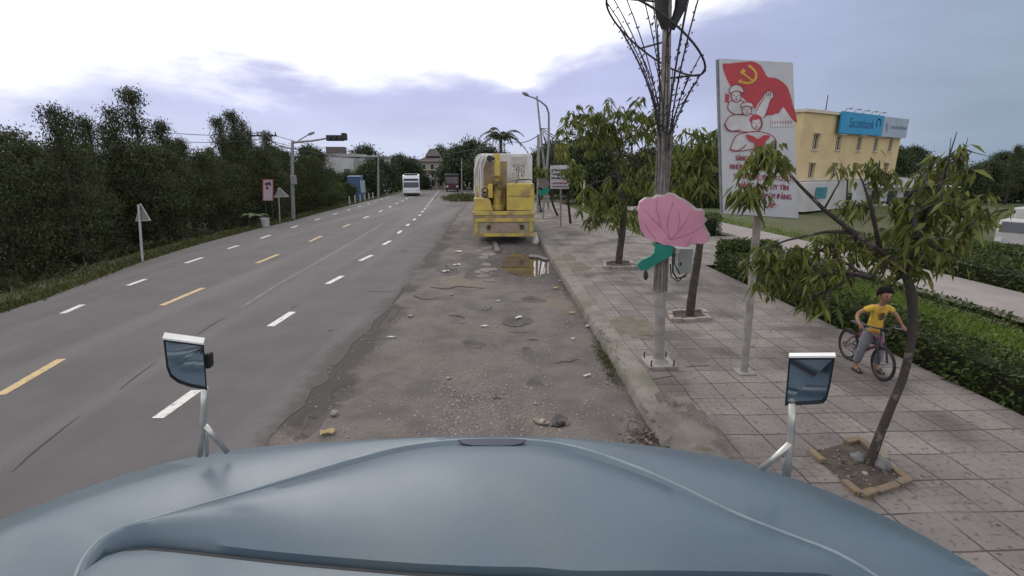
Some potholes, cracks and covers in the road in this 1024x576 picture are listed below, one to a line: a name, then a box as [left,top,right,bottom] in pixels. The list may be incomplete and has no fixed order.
pothole [462,339,487,350]
crack [375,265,497,322]
pothole [501,317,534,327]
pothole [525,378,544,387]
pothole [521,295,547,303]
